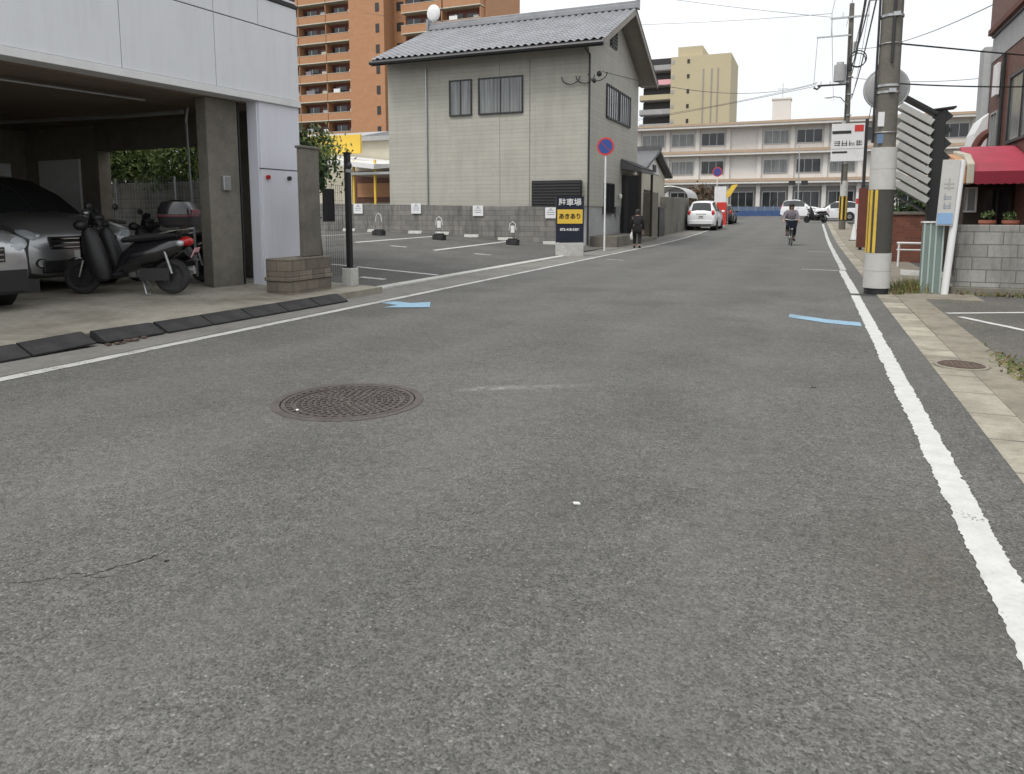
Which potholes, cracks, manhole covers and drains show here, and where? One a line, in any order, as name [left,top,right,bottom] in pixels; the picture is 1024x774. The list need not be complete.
manhole cover [271,383,423,422]
crack [1,550,167,583]
manhole cover [933,360,990,372]
